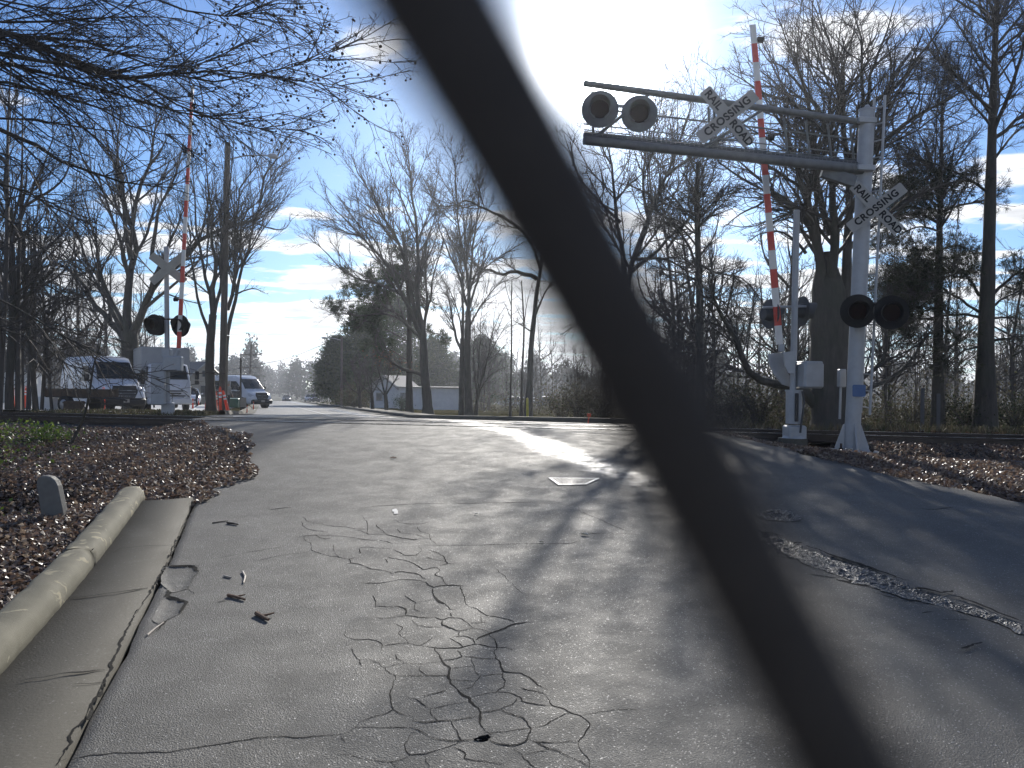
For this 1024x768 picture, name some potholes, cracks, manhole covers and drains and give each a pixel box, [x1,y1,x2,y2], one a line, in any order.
pothole [779,509,802,522]
pothole [797,544,1024,634]
pothole [152,592,184,624]
crack [59,507,637,768]
pothole [161,565,197,593]
